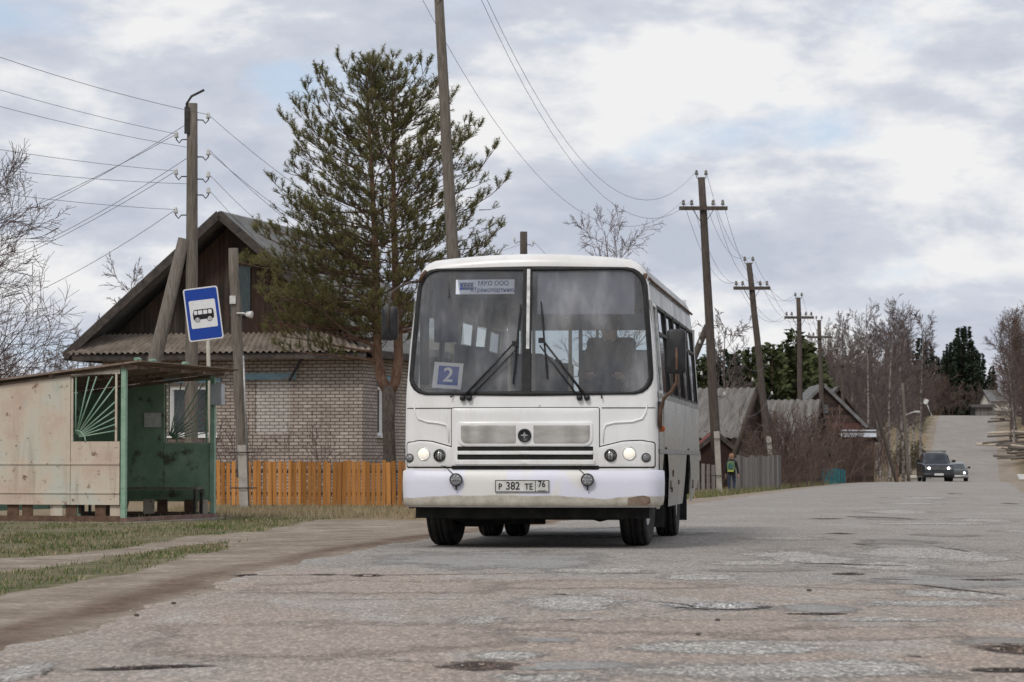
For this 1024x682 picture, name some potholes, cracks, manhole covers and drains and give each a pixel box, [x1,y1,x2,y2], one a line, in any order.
pothole [969,643,1024,654]
pothole [432,660,517,671]
pothole [659,601,775,611]
